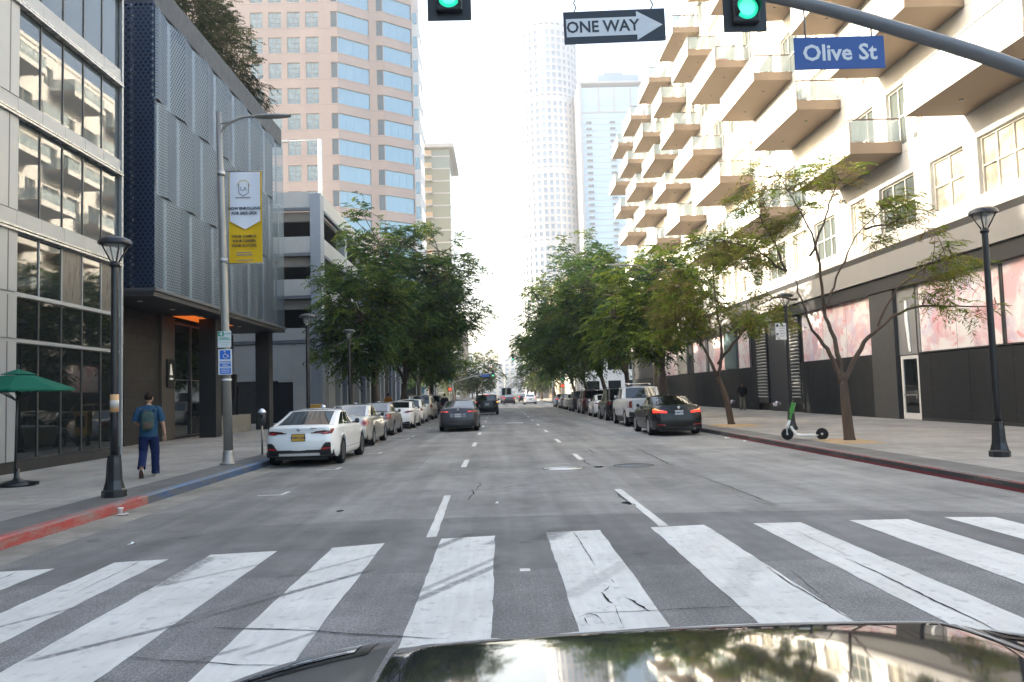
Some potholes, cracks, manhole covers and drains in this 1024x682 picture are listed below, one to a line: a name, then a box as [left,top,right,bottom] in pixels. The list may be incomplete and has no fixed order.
crack [573,532,730,627]
